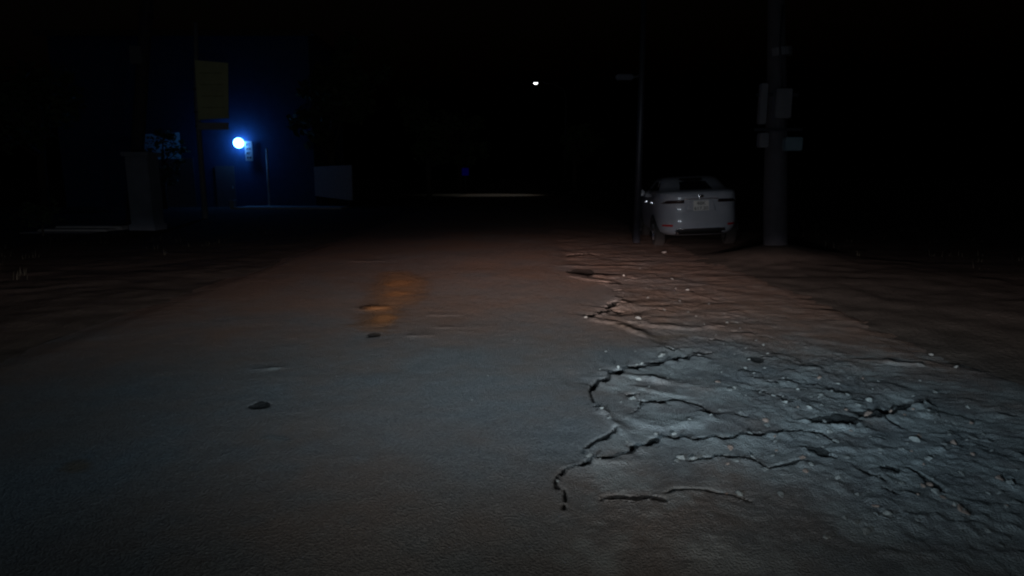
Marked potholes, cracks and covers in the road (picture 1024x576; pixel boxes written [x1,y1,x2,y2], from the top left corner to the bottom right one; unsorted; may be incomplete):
crack [909,467,945,493]
crack [867,401,923,426]
crack [553,427,762,511]
pothole [806,414,863,425]
crack [588,297,623,317]
pothole [248,401,270,410]
crack [588,347,712,414]
crack [772,431,836,468]
